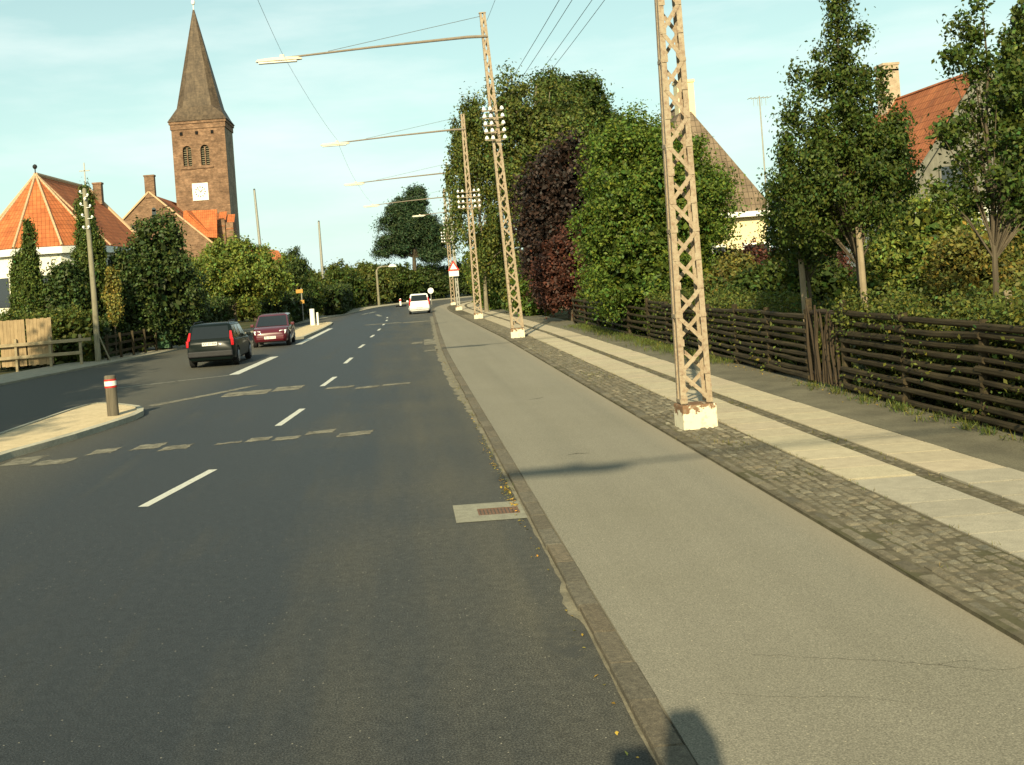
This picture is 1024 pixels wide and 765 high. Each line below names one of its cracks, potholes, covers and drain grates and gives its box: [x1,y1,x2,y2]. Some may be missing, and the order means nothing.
drain grate [453,501,528,523]
crack [755,654,1024,671]
